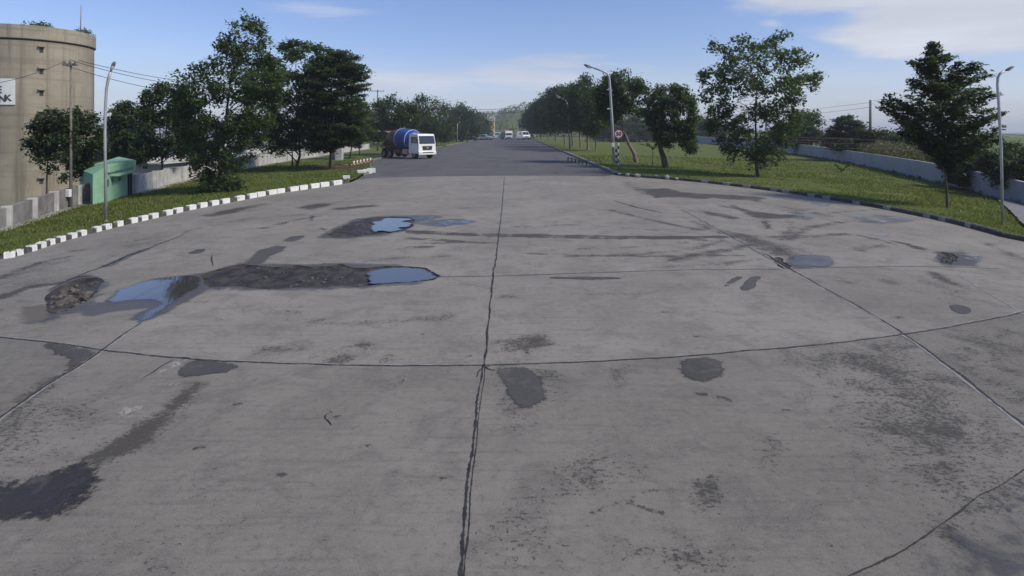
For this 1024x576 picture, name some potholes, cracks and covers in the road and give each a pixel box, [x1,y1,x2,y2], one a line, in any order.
pothole [44,277,105,314]
pothole [328,217,415,238]
pothole [201,264,440,289]
pothole [936,252,958,265]
